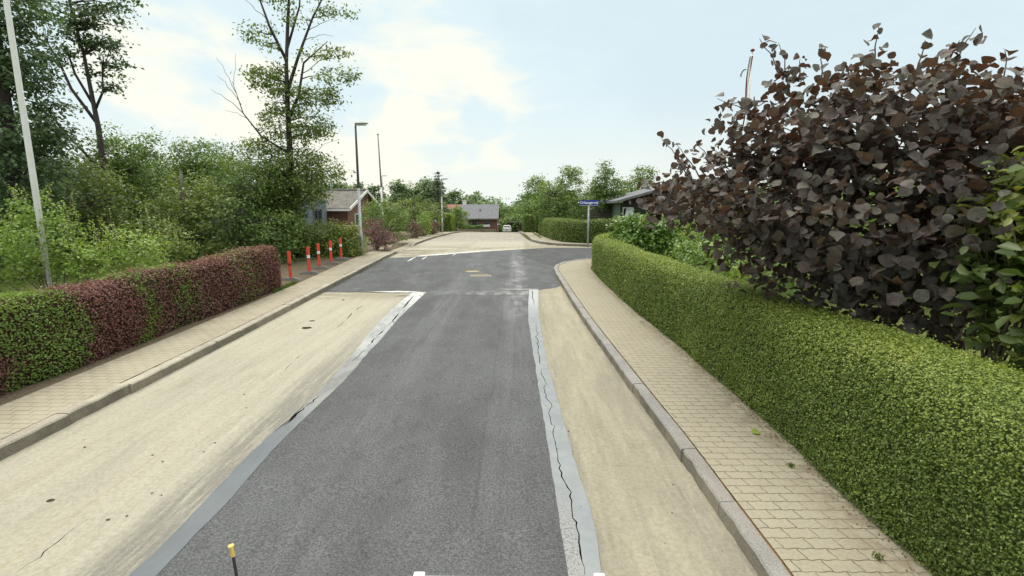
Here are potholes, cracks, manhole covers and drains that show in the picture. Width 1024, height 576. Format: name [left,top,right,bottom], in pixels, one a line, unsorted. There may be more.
crack [535,327,585,575]
crack [277,397,318,430]
